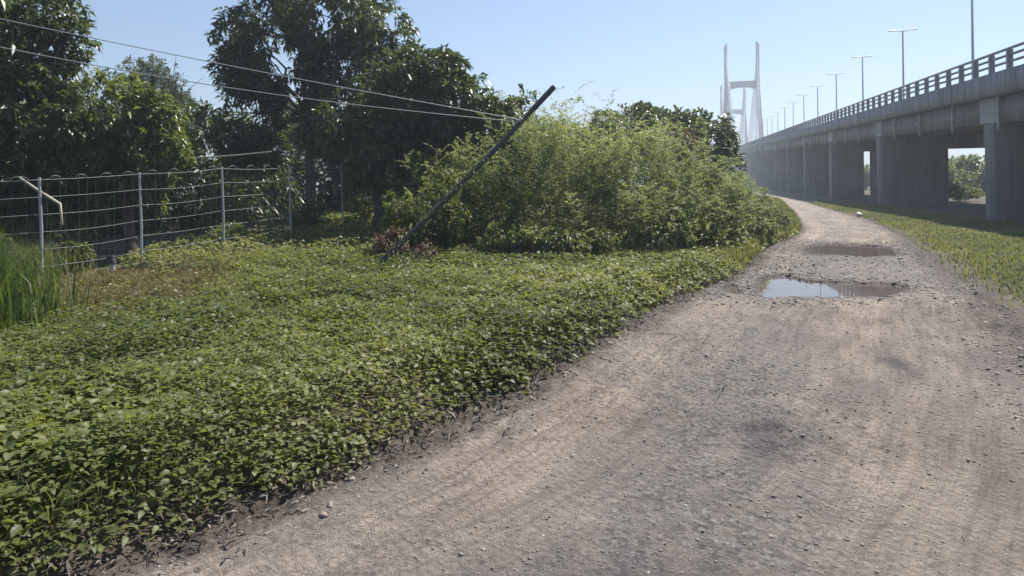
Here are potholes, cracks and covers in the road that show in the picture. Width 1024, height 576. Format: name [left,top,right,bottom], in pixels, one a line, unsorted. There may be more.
pothole [750,274,917,298]
pothole [795,244,901,257]
